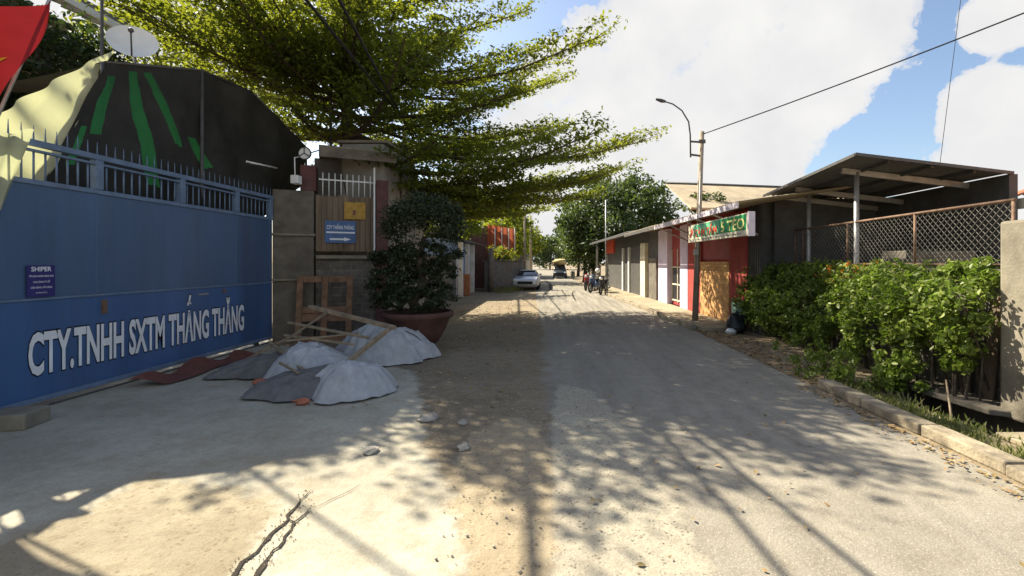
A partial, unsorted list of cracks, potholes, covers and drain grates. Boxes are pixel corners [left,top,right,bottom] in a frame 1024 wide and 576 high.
crack [229,486,357,576]
